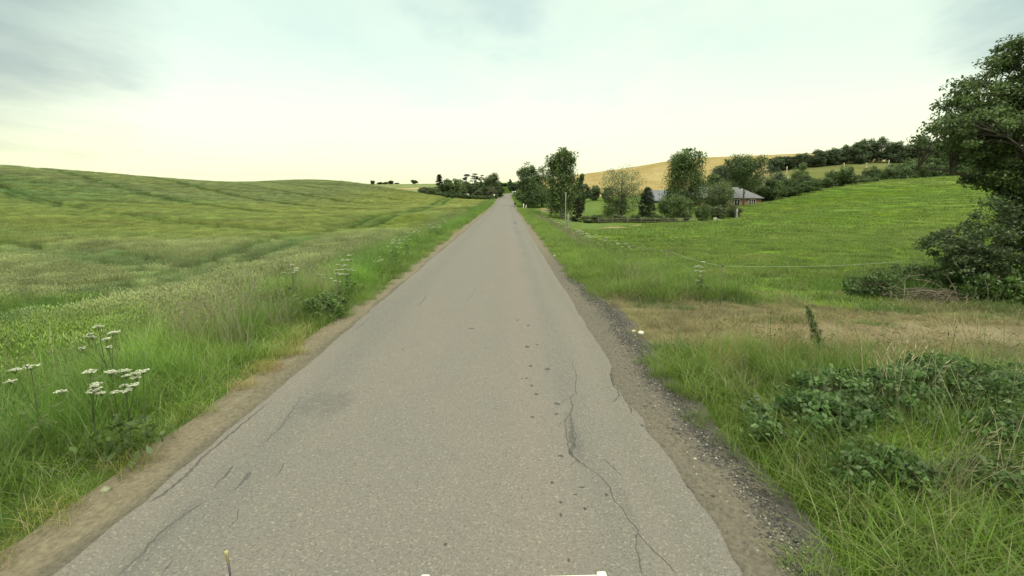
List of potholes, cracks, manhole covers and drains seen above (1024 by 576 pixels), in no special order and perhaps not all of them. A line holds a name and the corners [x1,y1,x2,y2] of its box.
crack [119,397,302,575]
crack [558,363,677,573]
